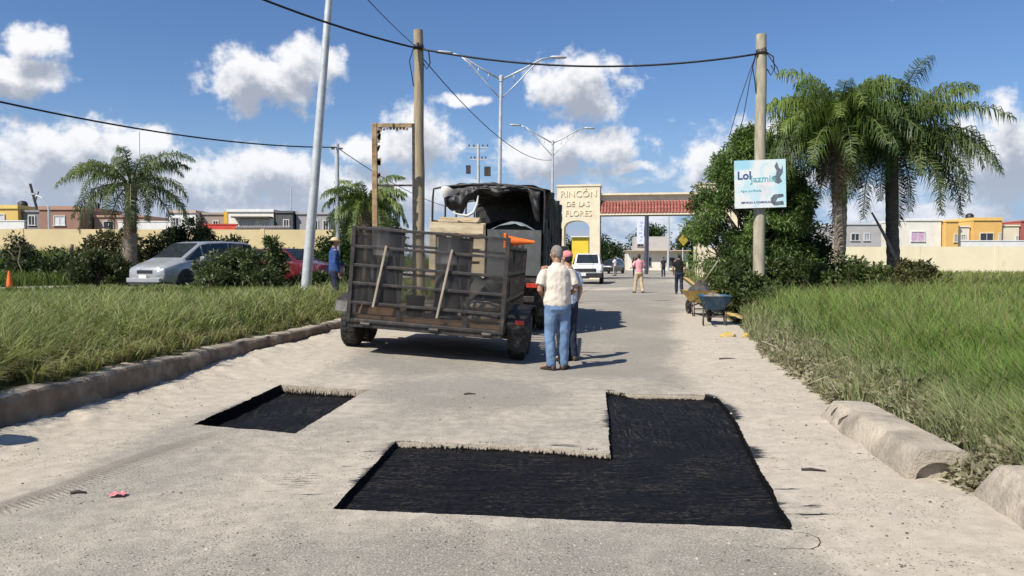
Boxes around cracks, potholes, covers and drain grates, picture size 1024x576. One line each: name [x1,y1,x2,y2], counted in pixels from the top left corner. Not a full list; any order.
crack [754,532,821,549]
